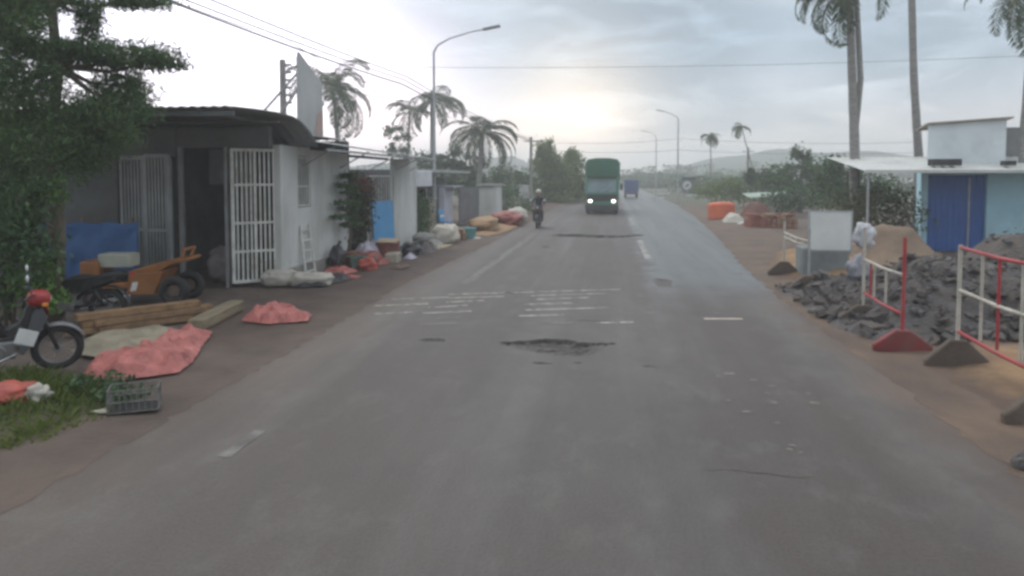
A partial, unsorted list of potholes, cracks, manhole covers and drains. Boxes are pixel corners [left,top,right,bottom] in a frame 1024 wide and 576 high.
crack [703,469,809,478]
pothole [652,278,672,287]
pothole [493,339,616,356]
